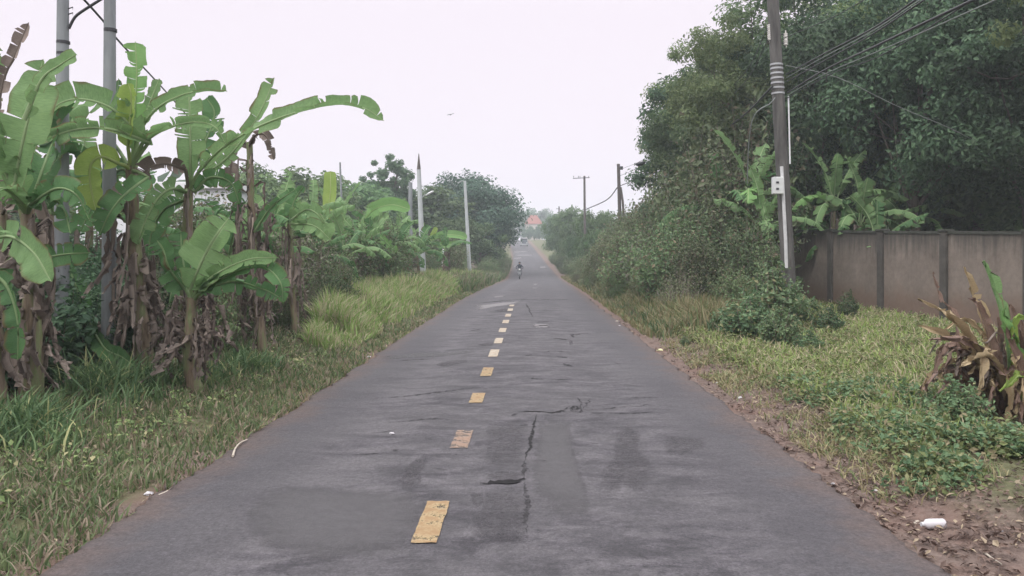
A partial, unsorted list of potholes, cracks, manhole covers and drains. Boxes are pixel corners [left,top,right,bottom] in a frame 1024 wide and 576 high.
crack [483,385,656,532]
crack [526,304,579,380]
